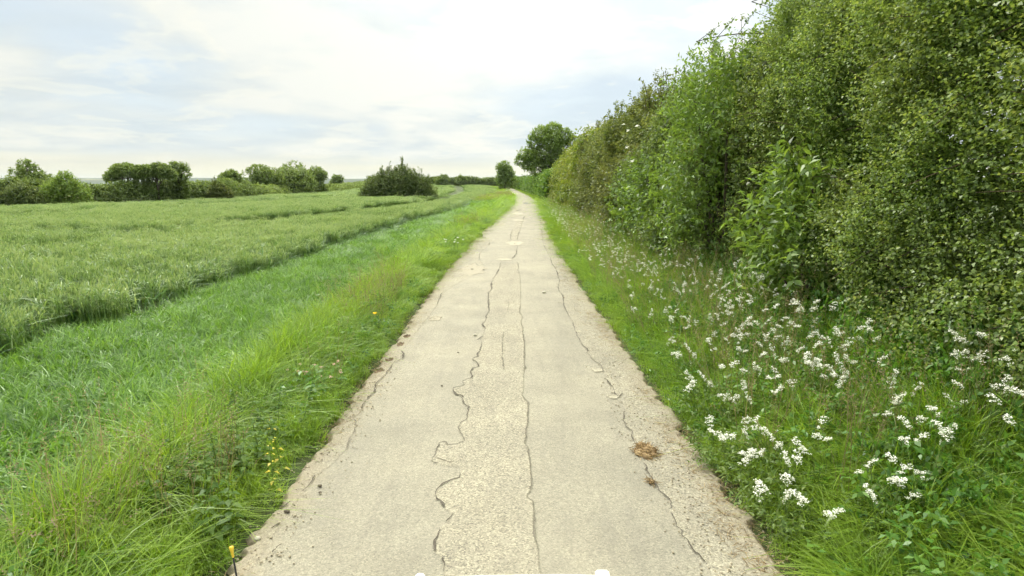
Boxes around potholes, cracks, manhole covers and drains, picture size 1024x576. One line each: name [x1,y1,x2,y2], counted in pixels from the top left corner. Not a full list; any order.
crack [346,351,404,449]
crack [432,210,634,571]
crack [644,463,706,562]
